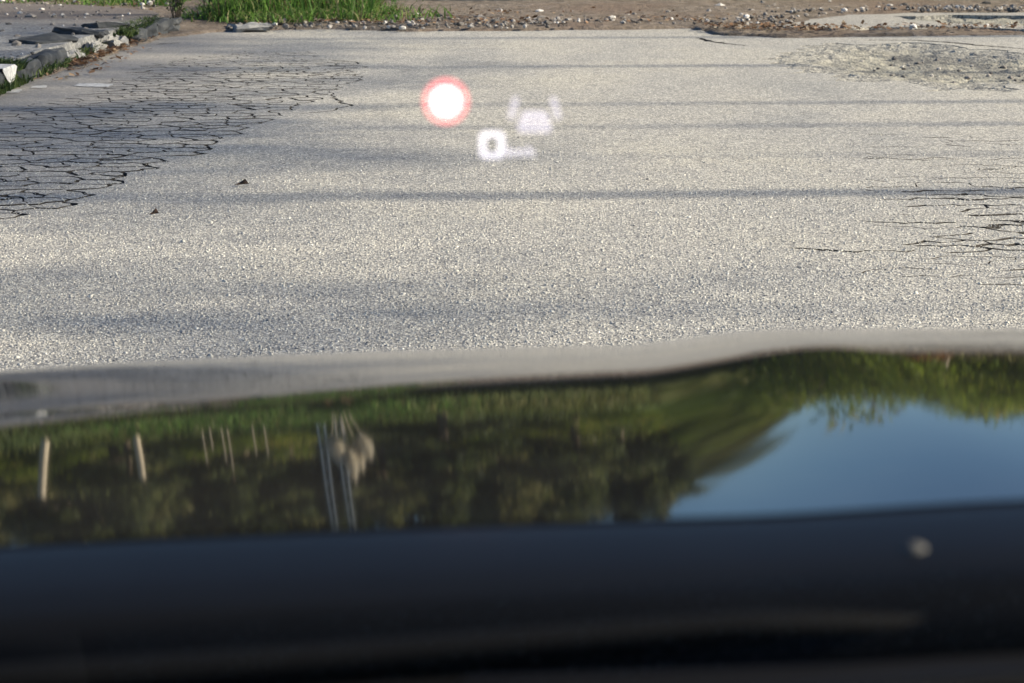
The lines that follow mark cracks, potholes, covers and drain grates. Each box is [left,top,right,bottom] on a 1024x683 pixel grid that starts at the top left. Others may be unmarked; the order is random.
crack [0,51,366,219]
pothole [766,42,1024,93]
crack [846,137,1024,286]
